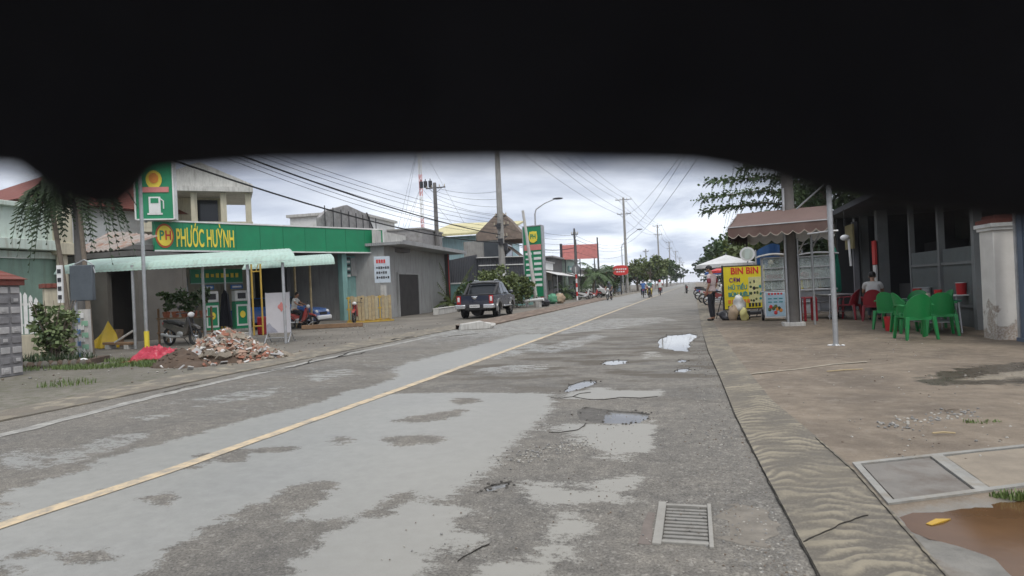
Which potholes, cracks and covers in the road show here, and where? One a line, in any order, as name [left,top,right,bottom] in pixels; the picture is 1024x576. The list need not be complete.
manhole cover [852,454,986,505]
pothole [657,333,697,352]
pothole [564,379,602,392]
pothole [571,407,653,425]
drain grate [652,501,714,549]
pothole [477,480,515,493]
crack [458,543,490,561]
crack [550,392,658,400]
